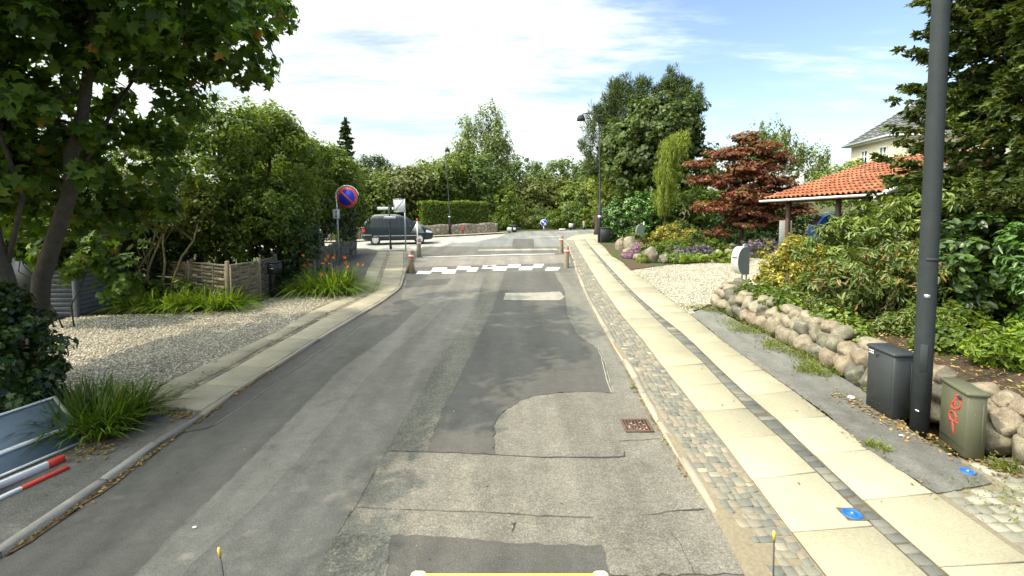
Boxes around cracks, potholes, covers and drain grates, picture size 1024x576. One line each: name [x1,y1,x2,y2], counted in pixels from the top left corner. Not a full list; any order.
drain grate [620,419,654,432]
